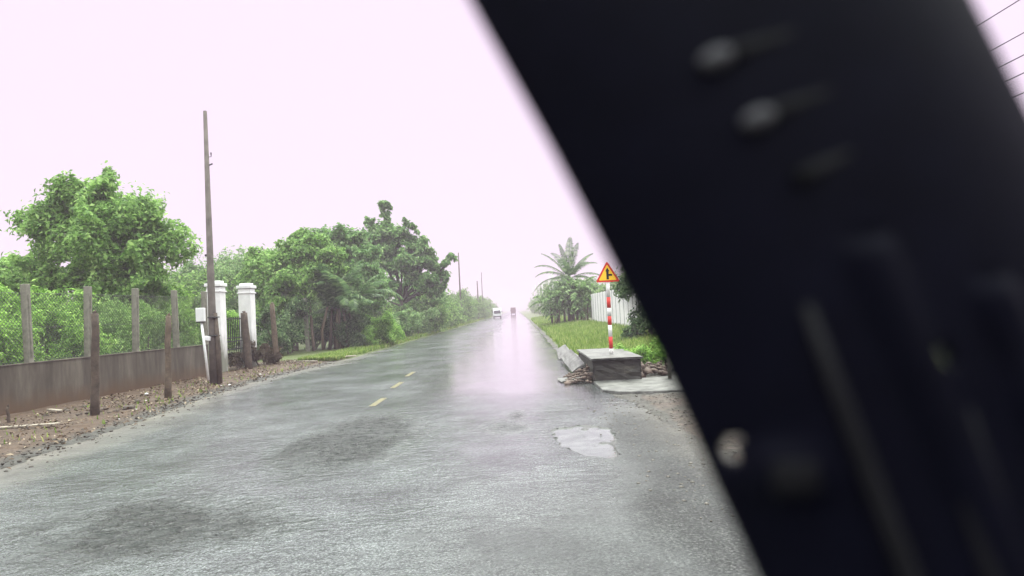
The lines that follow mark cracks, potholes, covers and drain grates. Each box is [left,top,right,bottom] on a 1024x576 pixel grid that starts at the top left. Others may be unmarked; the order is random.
pothole [551,425,620,459]
